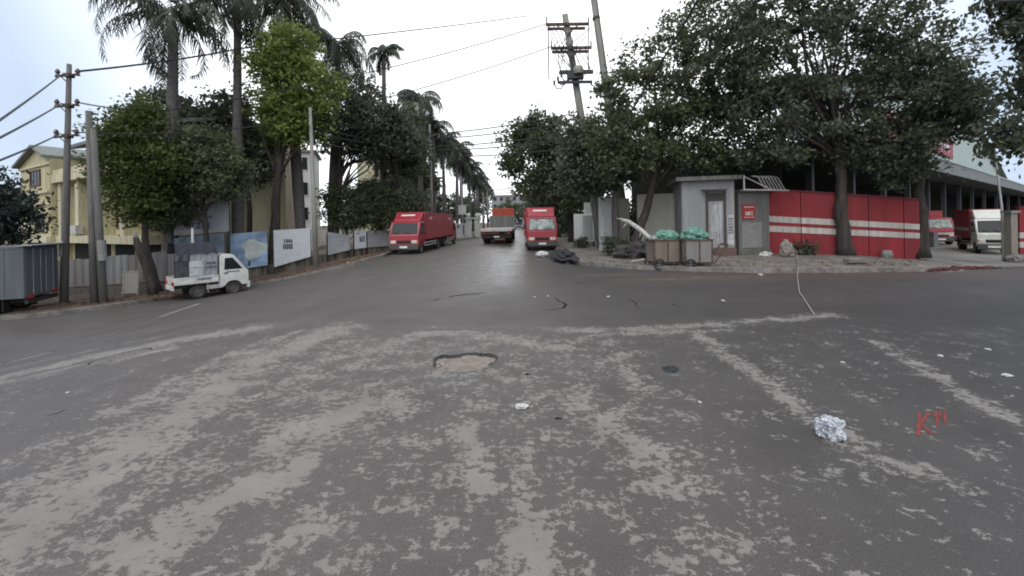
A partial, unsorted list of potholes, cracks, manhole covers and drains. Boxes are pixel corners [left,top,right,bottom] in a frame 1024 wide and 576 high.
pothole [433,353,498,372]
